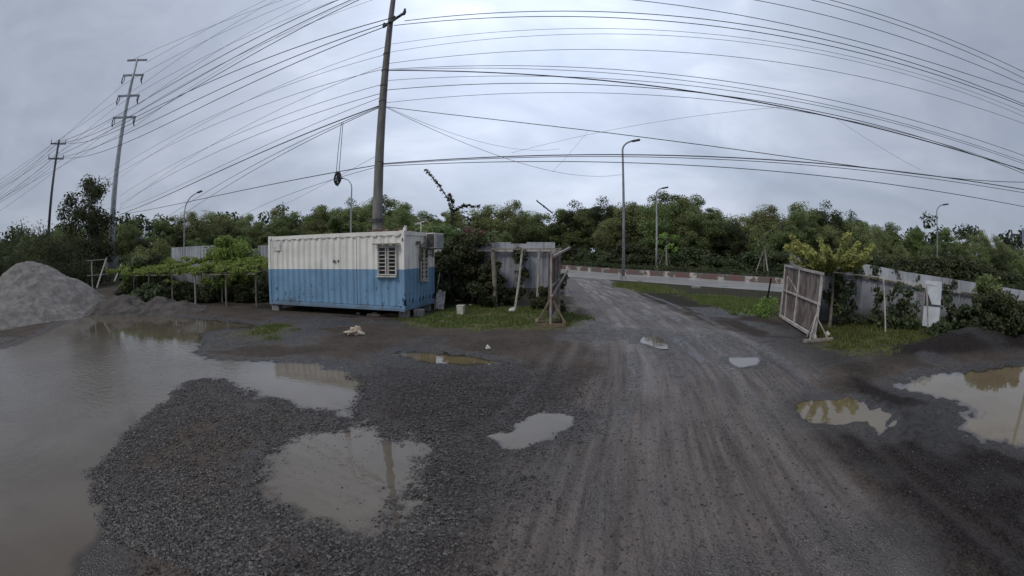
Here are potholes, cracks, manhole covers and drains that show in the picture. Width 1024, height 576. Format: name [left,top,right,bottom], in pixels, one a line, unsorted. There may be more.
pothole [632,335,672,350]
pothole [473,406,591,453]
pothole [720,354,769,369]
pothole [781,393,902,440]
